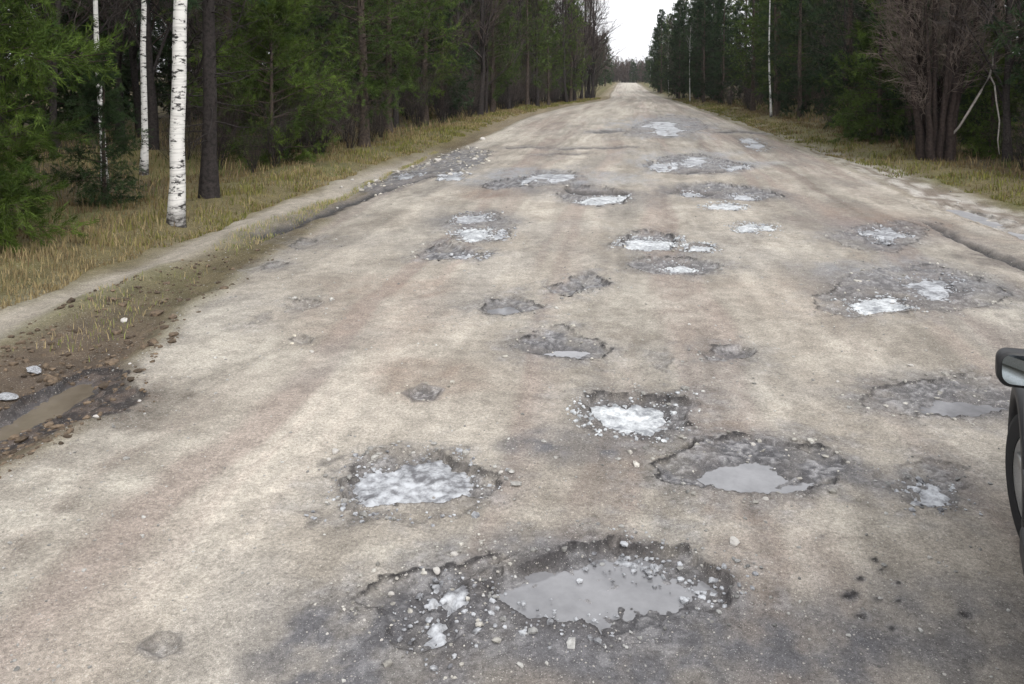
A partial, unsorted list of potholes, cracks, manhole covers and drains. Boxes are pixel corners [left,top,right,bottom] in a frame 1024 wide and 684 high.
pothole [688,336,758,364]
pothole [310,533,528,679]
pothole [611,228,689,252]
pothole [676,240,723,254]
pothole [565,386,722,450]
pothole [822,220,943,253]
pothole [697,200,751,212]
pothole [803,260,1013,320]
pothole [502,323,628,362]
pothole [479,175,535,190]
pothole [516,170,586,187]
